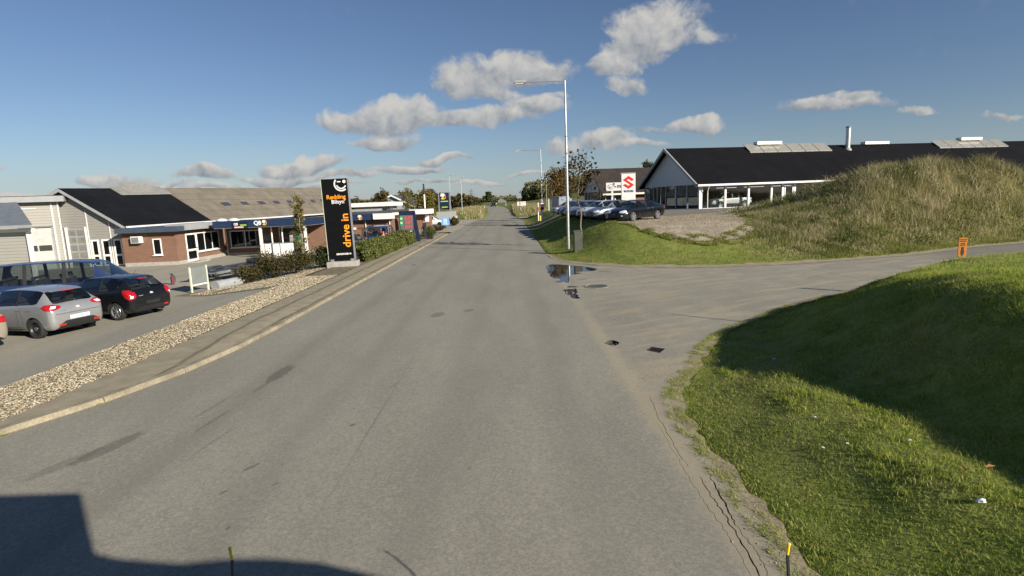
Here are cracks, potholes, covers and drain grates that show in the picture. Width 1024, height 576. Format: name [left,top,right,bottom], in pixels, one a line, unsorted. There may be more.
crack [650,398,768,576]
